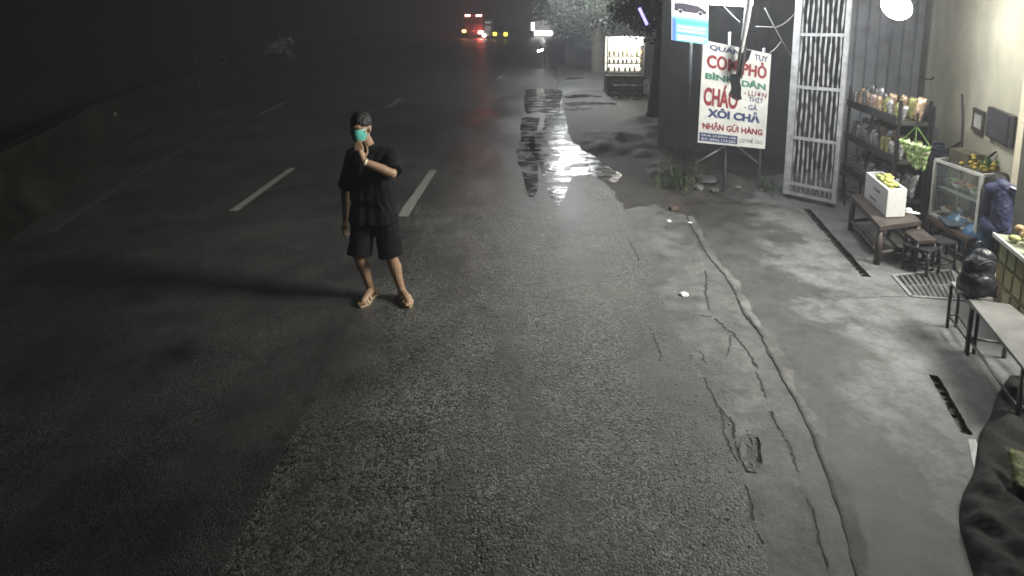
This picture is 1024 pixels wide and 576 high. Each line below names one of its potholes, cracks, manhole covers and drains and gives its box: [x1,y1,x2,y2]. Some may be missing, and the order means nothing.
pothole [738,433,764,472]
drain grate [891,269,965,301]
crack [649,326,662,362]
crack [698,270,831,569]
